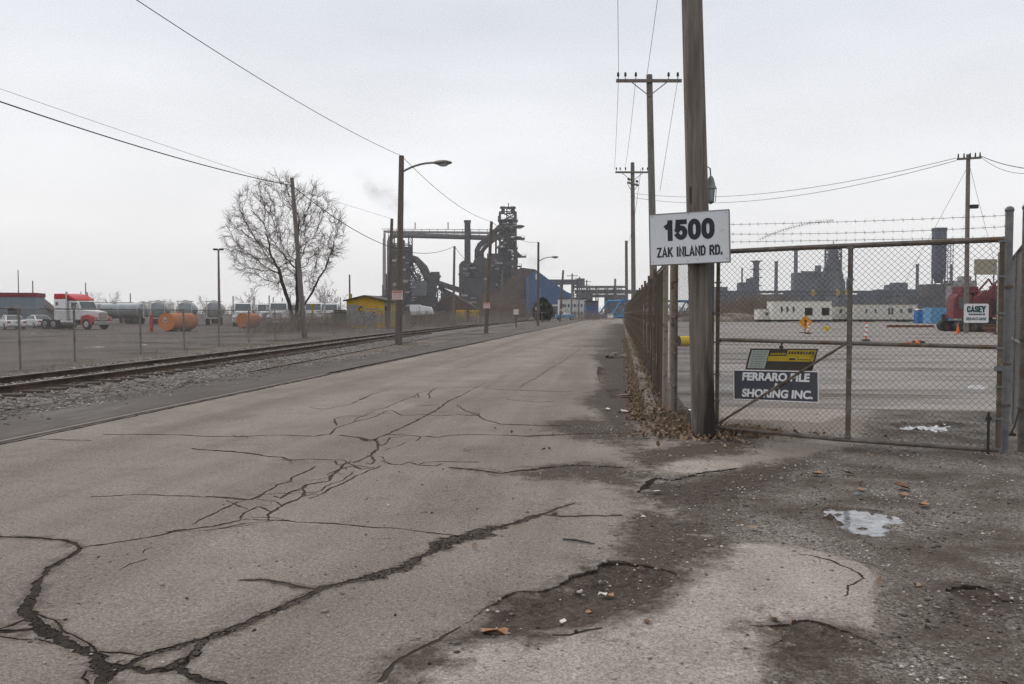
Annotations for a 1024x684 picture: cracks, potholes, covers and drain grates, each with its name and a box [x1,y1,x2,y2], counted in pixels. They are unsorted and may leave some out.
pothole [766,620,877,678]
crack [799,554,866,596]
crack [0,383,737,684]
pothole [945,585,1014,618]
pothole [441,560,681,644]
